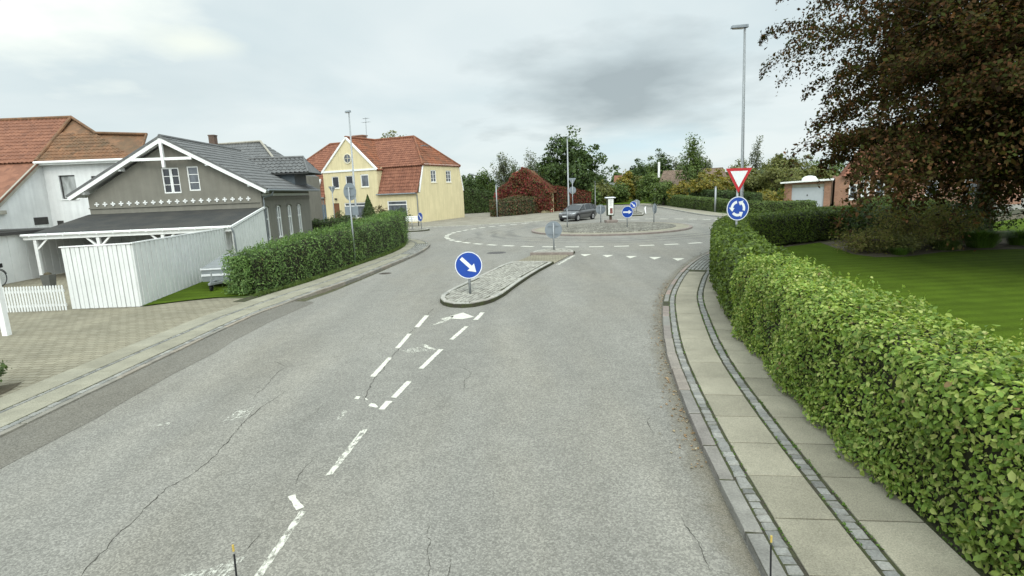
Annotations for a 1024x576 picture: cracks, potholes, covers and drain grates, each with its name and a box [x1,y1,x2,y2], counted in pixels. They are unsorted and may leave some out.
crack [81,362,311,576]
